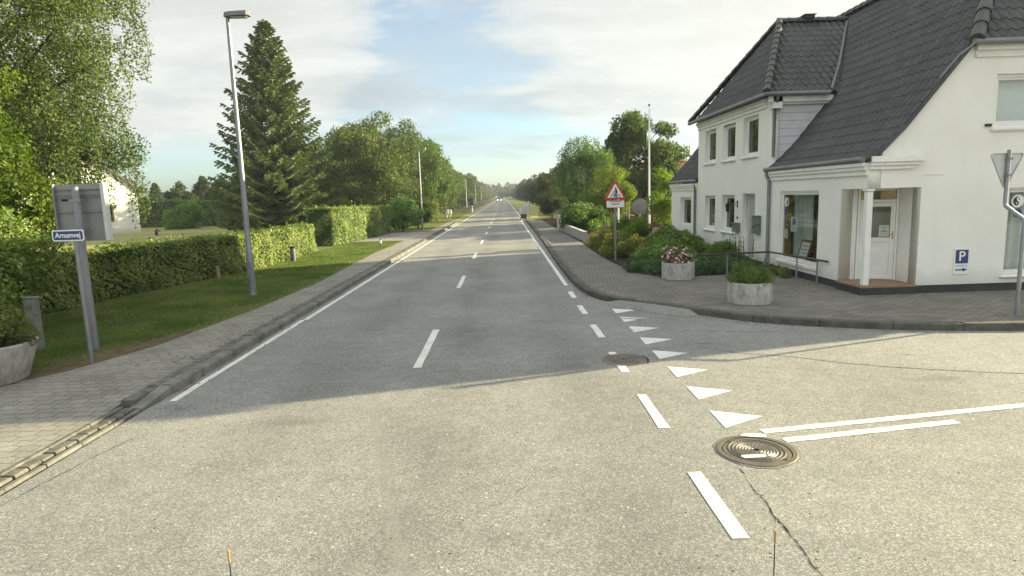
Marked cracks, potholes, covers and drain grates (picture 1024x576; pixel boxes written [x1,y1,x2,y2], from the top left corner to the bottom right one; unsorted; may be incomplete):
manhole cover [602,354,647,366]
crack [740,469,823,576]
manhole cover [713,433,802,469]
